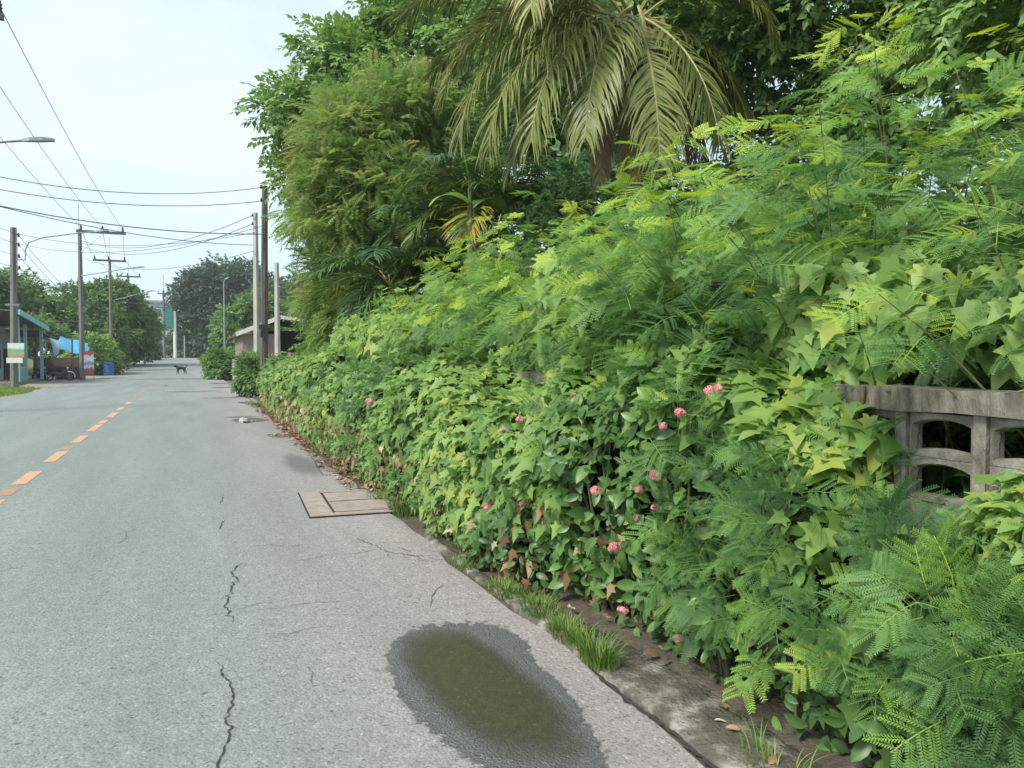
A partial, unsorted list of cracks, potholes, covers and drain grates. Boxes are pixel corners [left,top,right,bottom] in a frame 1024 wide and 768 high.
crack [261,538,444,562]
crack [224,563,335,618]
crack [216,662,234,768]
